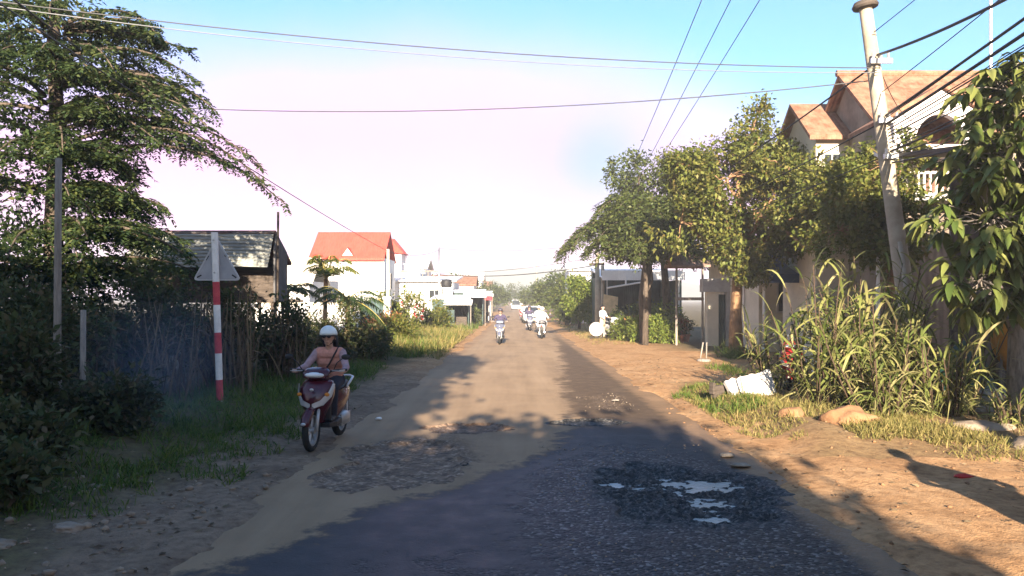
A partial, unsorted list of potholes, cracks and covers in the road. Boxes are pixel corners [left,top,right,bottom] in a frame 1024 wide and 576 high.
pothole [307,437,472,494]
pothole [585,460,799,536]
pothole [419,422,516,434]
pothole [545,418,633,426]
